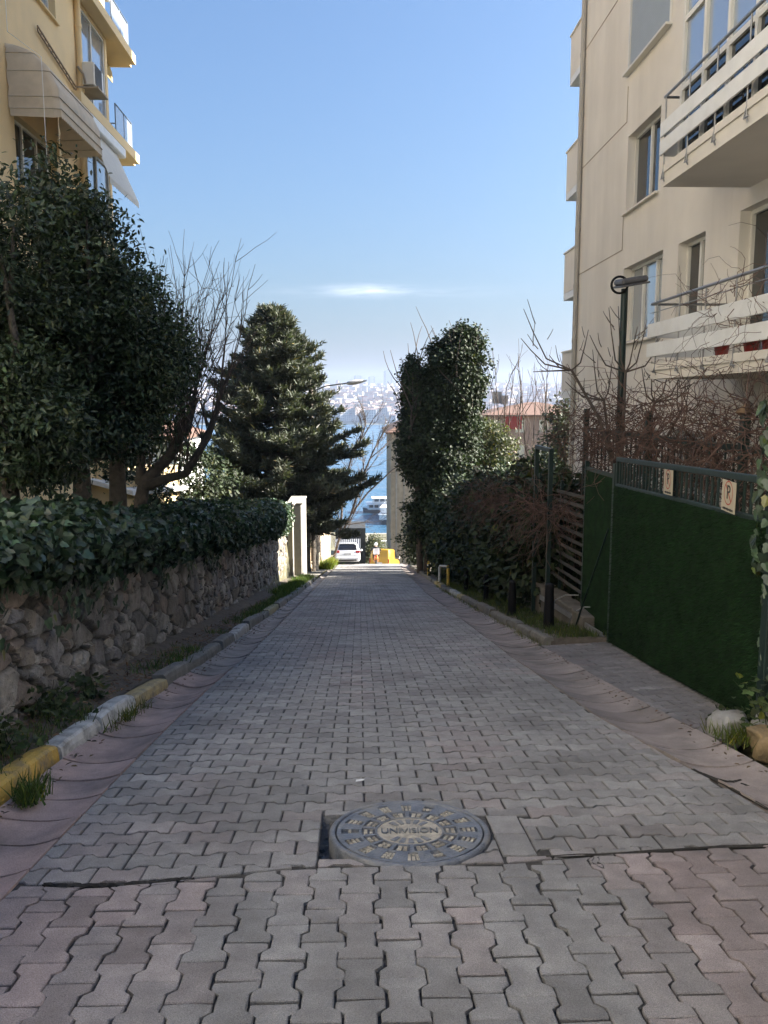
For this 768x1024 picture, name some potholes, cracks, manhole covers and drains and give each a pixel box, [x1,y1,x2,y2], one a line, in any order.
manhole cover [329,801,491,868]
